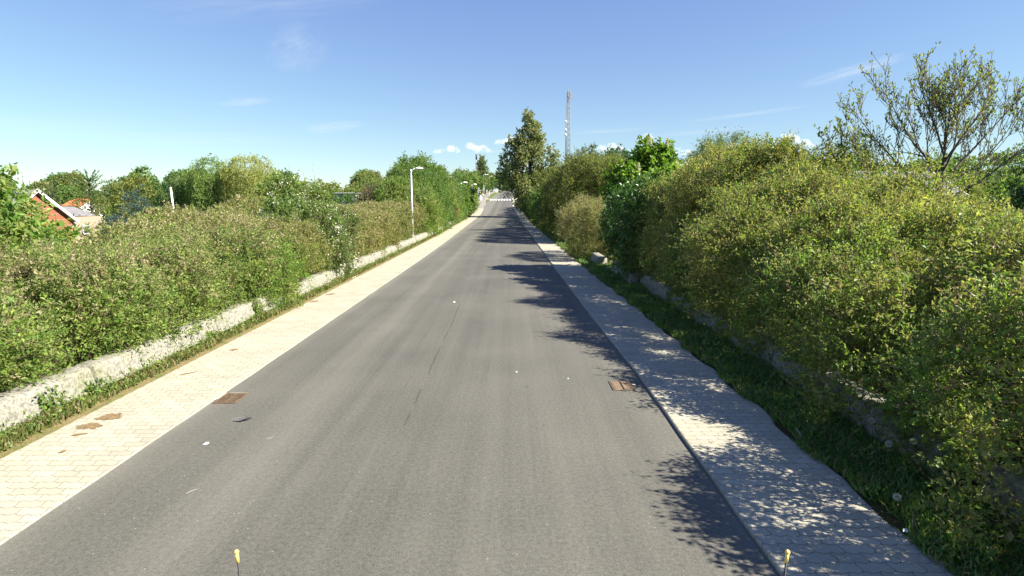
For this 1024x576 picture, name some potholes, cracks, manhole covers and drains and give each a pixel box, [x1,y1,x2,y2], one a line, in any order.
crack [405,303,460,424]
manhole cover [212,393,249,404]
